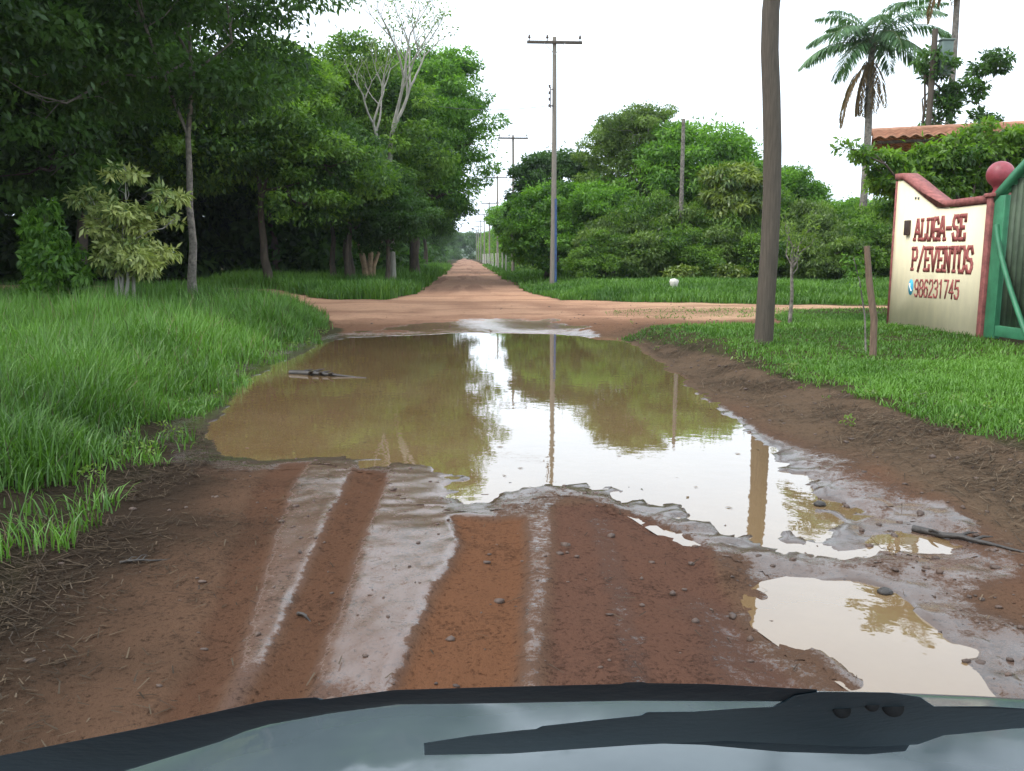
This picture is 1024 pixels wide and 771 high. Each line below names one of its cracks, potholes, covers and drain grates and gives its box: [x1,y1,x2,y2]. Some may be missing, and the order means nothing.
pothole [161,329,916,578]
pothole [731,563,1024,698]
pothole [851,526,999,560]
